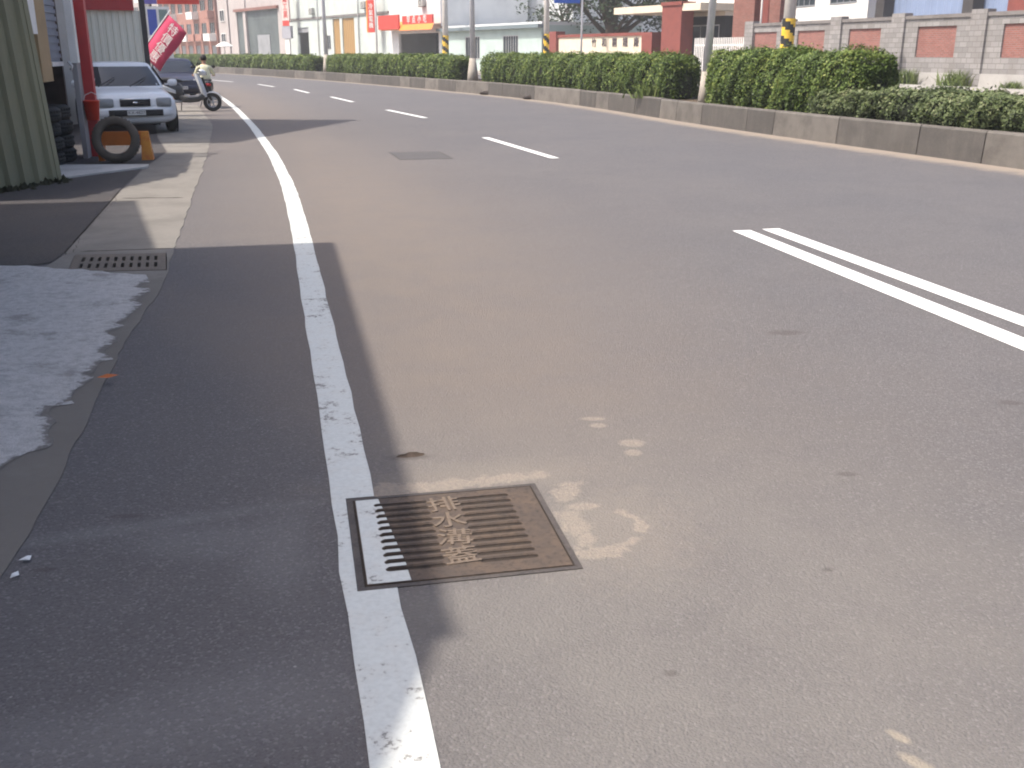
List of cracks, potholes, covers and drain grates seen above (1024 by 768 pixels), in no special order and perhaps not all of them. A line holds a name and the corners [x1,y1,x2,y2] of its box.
drain grate [69,253,167,272]
